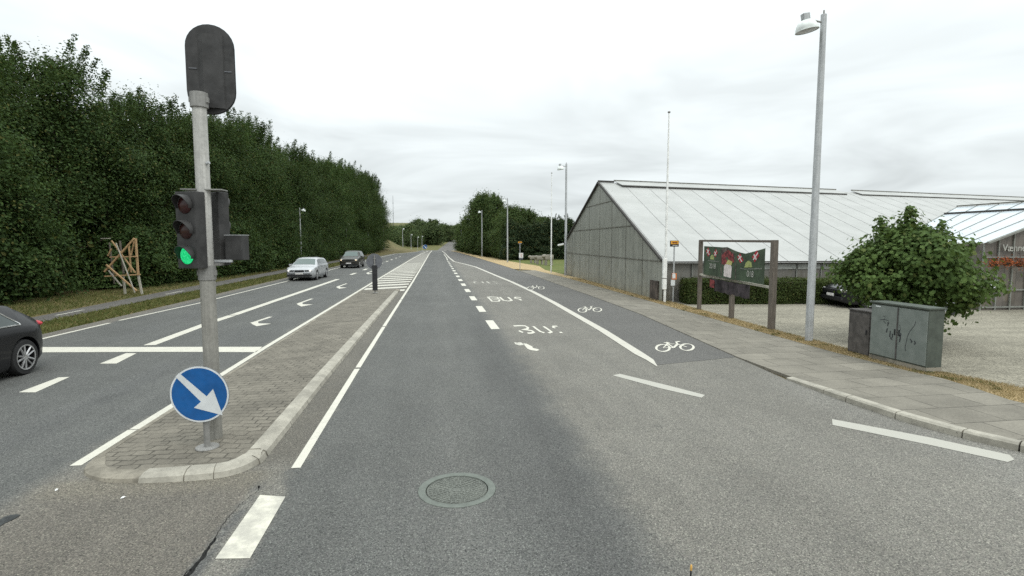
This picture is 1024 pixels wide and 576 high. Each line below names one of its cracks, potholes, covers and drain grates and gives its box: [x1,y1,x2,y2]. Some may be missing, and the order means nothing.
crack [183,486,260,576]
manhole cover [418,473,496,508]
